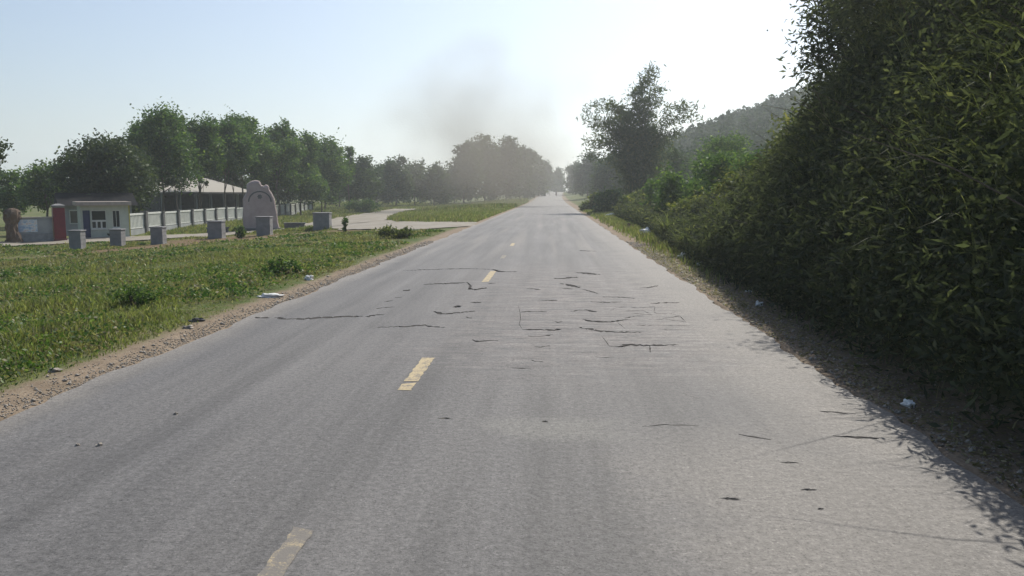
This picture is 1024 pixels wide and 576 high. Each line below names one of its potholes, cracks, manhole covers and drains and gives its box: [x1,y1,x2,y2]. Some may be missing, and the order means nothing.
crack [255,268,684,369]
